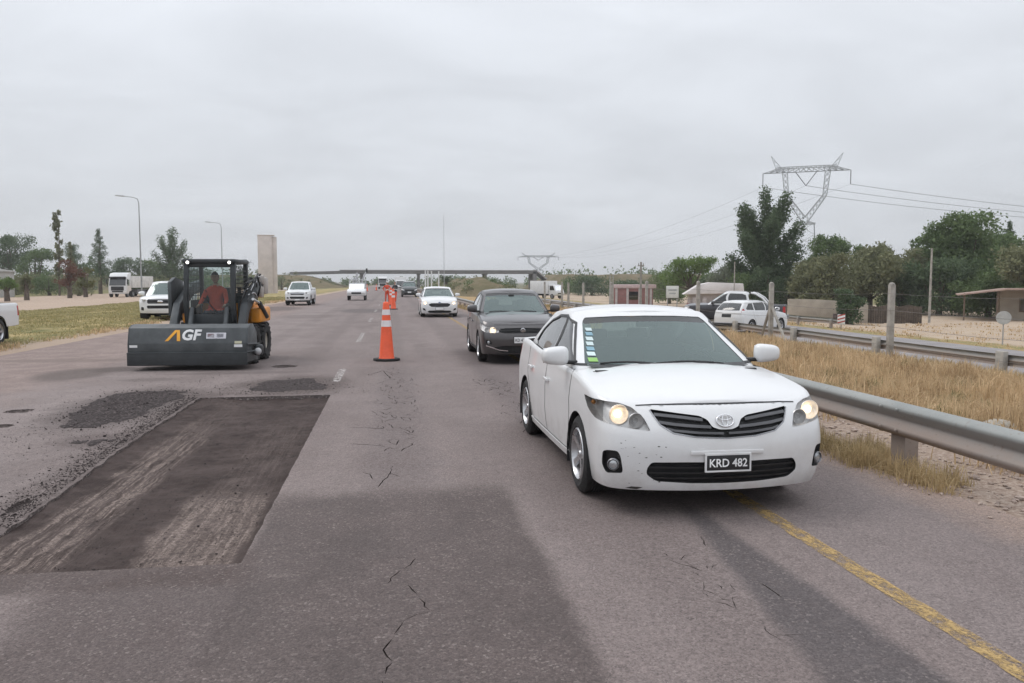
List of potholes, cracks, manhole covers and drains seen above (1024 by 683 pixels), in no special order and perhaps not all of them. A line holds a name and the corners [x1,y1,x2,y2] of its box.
crack [360,368,419,487]
crack [473,378,546,437]
crack [664,538,780,609]
crack [380,559,442,683]
